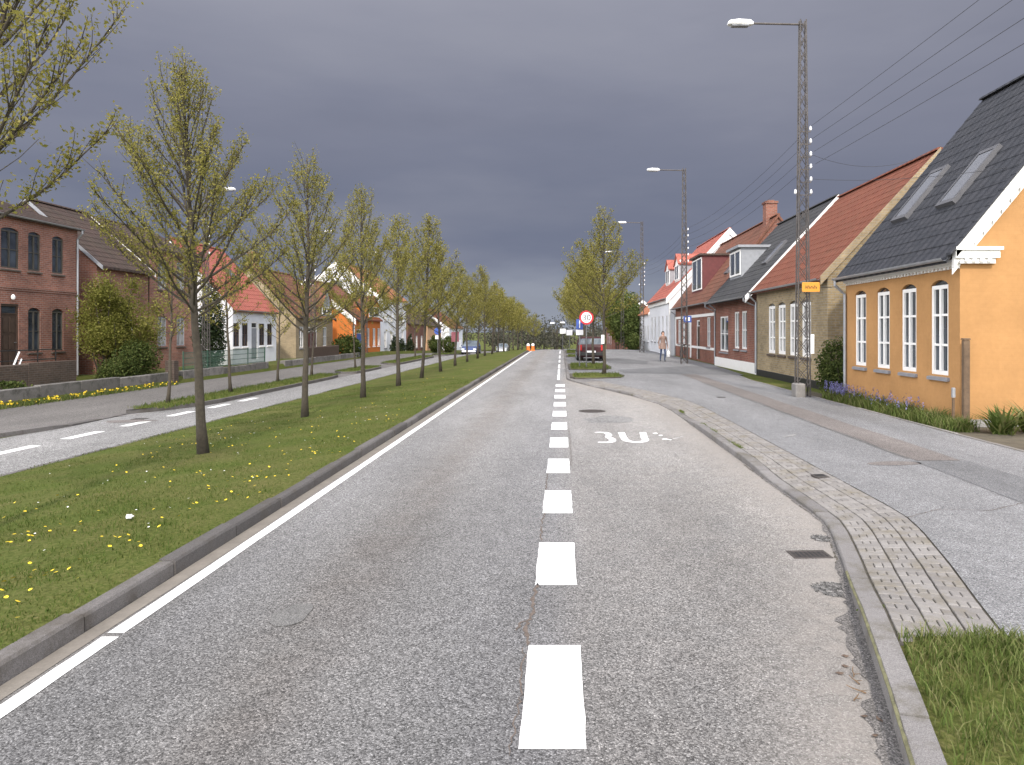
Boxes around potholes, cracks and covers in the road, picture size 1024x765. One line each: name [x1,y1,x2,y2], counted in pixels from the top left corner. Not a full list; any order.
crack [508,585,539,755]
drain grate [786,550,833,559]
pothole [810,581,851,598]
pothole [810,534,831,542]
